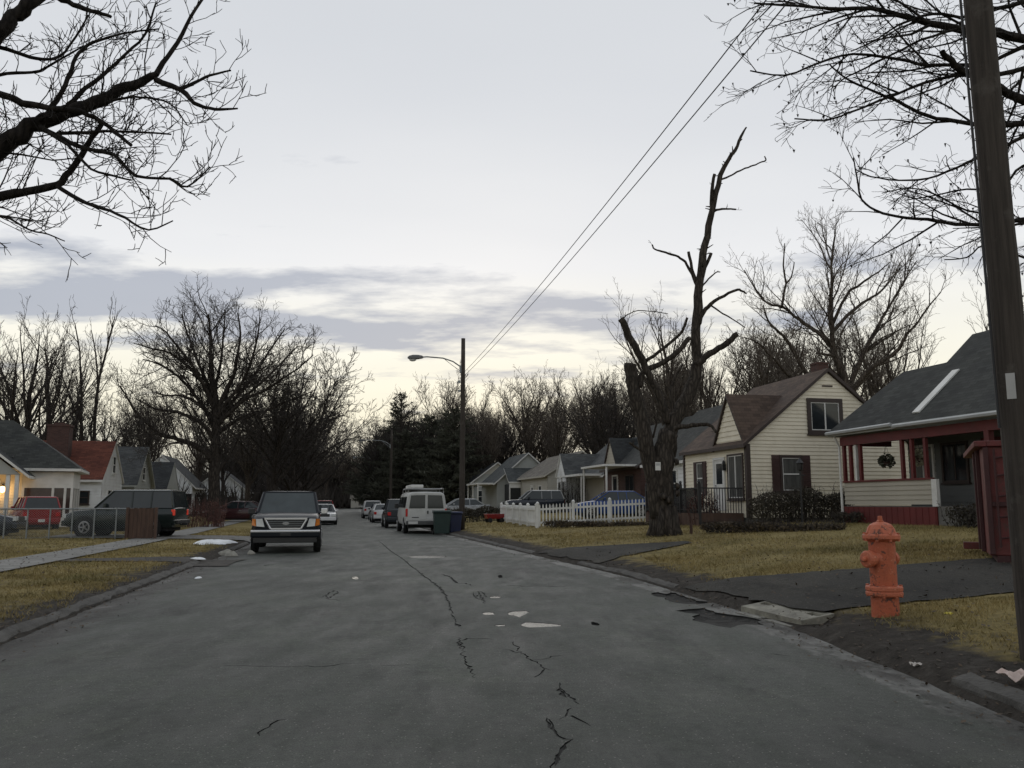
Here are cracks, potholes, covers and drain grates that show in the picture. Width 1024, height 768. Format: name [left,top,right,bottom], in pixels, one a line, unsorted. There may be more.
crack [510,642,589,768]
pothole [652,592,709,604]
pothole [677,608,763,628]
crack [382,543,487,676]
